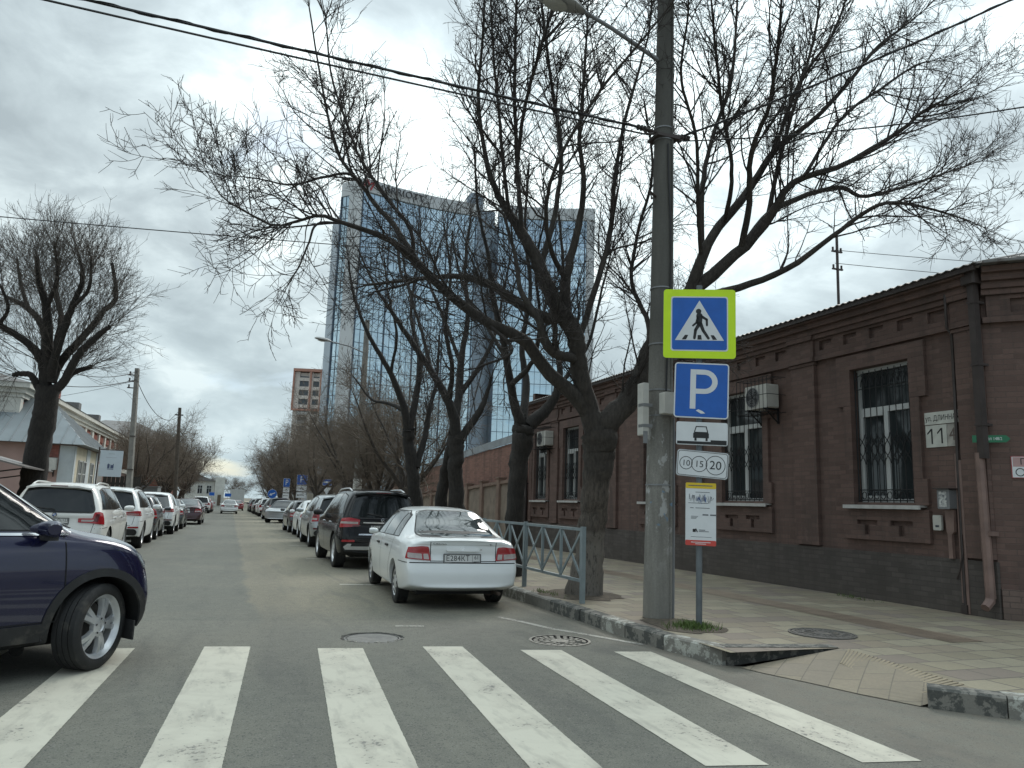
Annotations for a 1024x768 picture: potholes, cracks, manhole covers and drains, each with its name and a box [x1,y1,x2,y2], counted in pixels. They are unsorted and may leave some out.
manhole cover [788,628,858,640]
manhole cover [340,632,405,643]
manhole cover [528,635,592,647]
